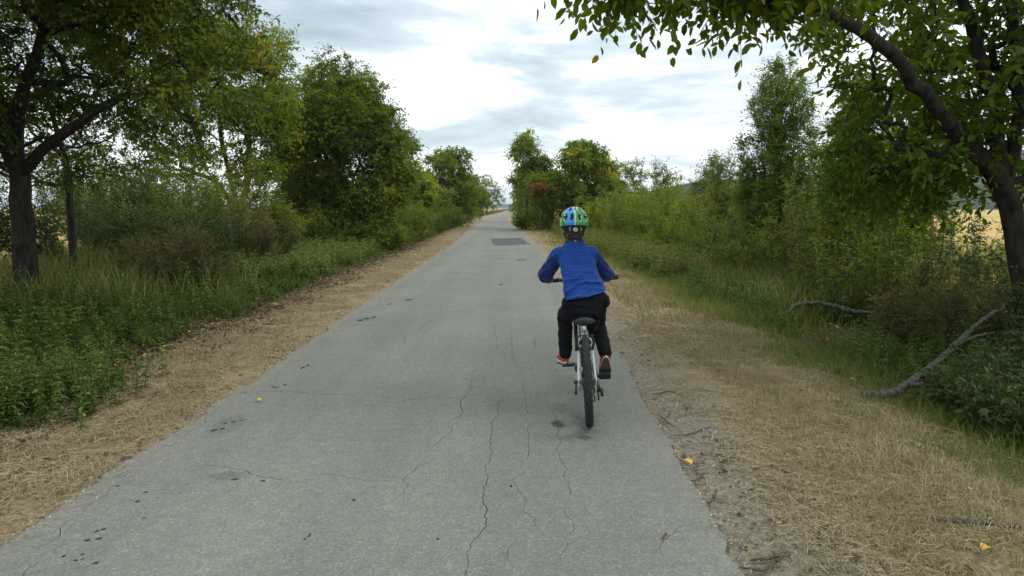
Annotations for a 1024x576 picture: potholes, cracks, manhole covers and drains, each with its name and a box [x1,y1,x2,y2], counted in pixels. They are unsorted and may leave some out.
crack [495,319,538,529]
crack [245,373,473,506]
crack [464,399,503,576]
